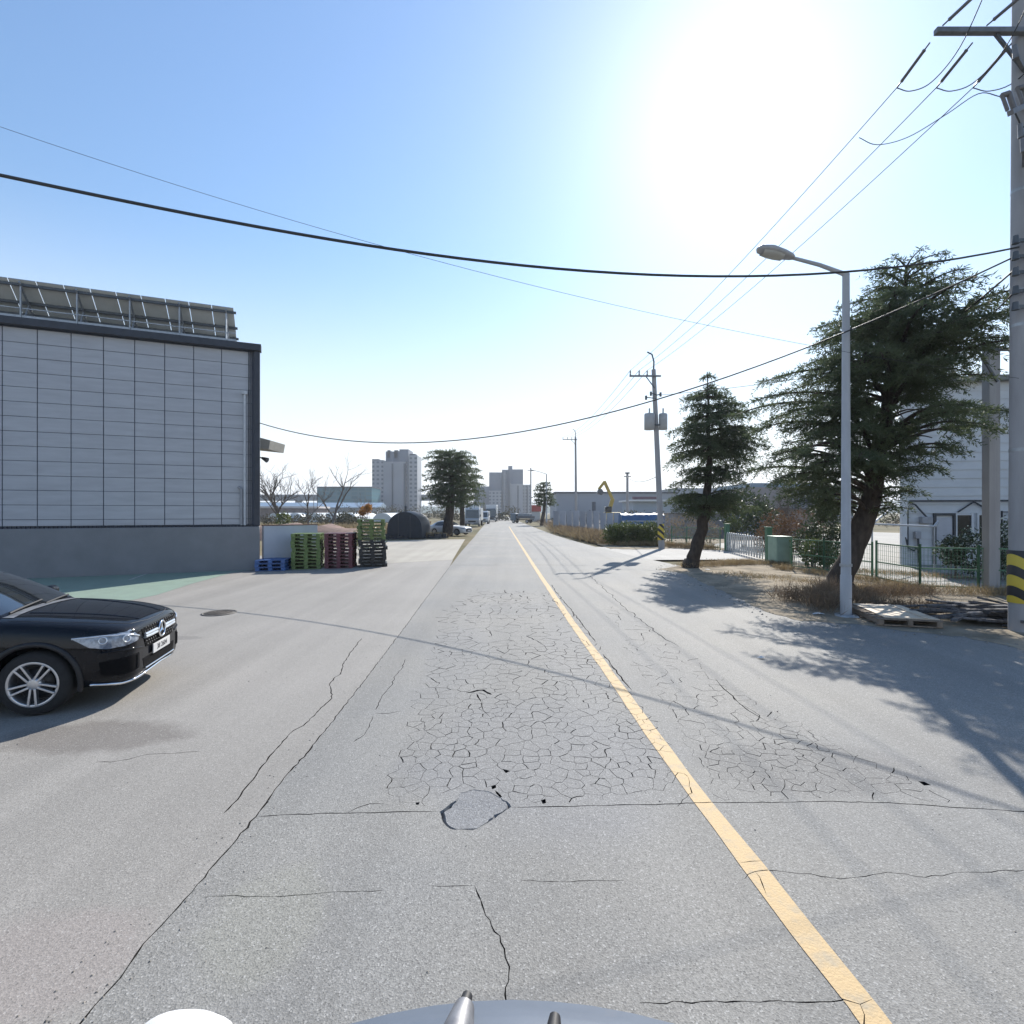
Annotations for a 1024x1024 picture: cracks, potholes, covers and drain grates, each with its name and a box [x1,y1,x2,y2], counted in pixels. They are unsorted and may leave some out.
crack [475,887,510,1000]
crack [590,576,950,802]
crack [224,642,358,813]
crack [387,591,692,806]
crack [354,661,405,742]
crack [745,870,1024,893]
